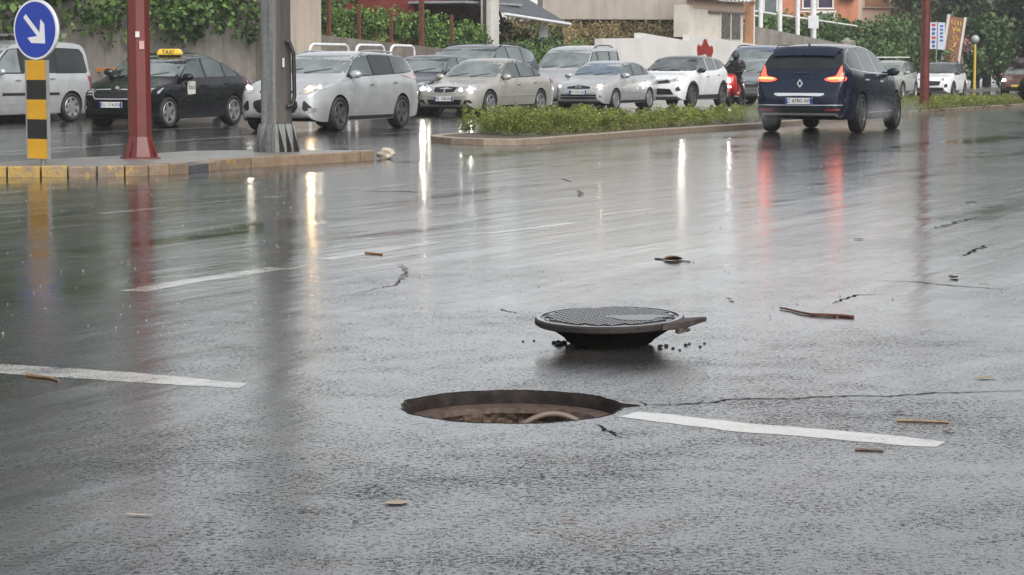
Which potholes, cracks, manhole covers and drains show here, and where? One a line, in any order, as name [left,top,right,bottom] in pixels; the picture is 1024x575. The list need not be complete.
crack [833,280,1001,303]
crack [625,390,1019,405]
manhole cover [535,306,707,348]
crack [361,264,408,292]
